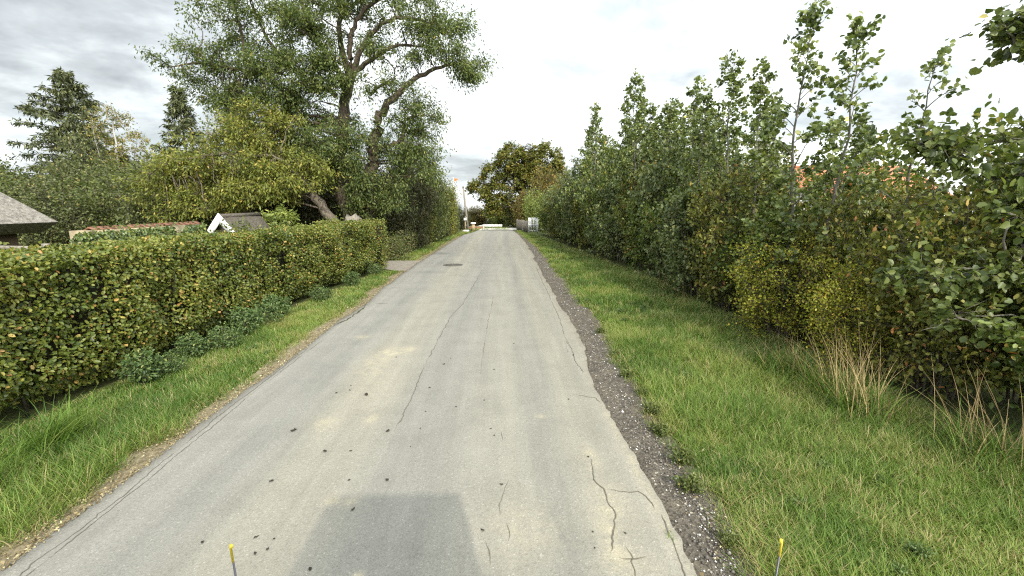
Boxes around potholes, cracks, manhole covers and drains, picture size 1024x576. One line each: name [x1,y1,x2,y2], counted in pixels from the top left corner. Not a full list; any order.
crack [591,459,686,576]
